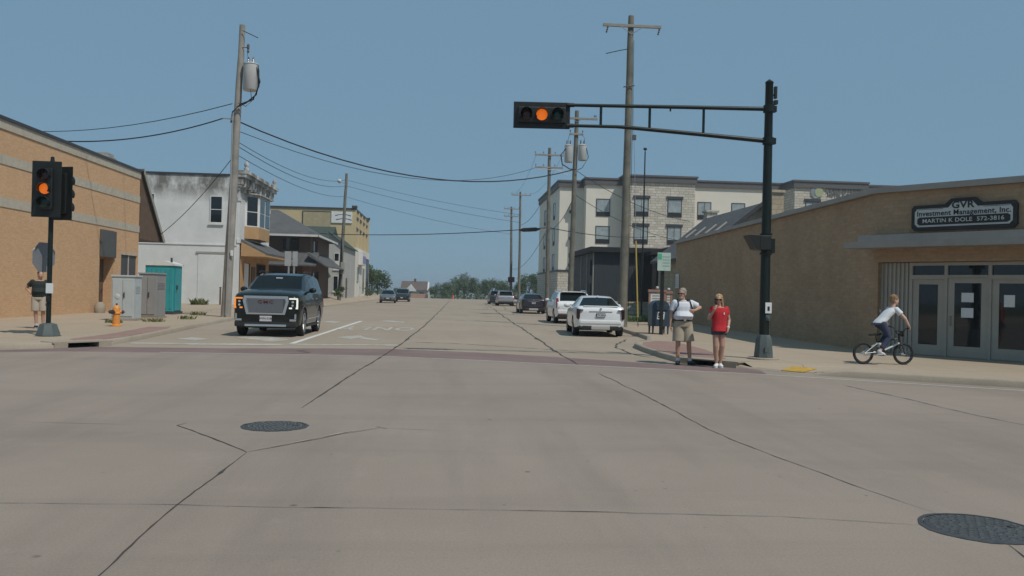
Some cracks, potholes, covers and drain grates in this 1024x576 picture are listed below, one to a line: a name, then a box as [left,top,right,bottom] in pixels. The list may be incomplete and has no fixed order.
manhole cover [918,513,1024,545]
drain grate [680,356,749,368]
drain grate [40,339,113,348]
manhole cover [240,421,309,431]
